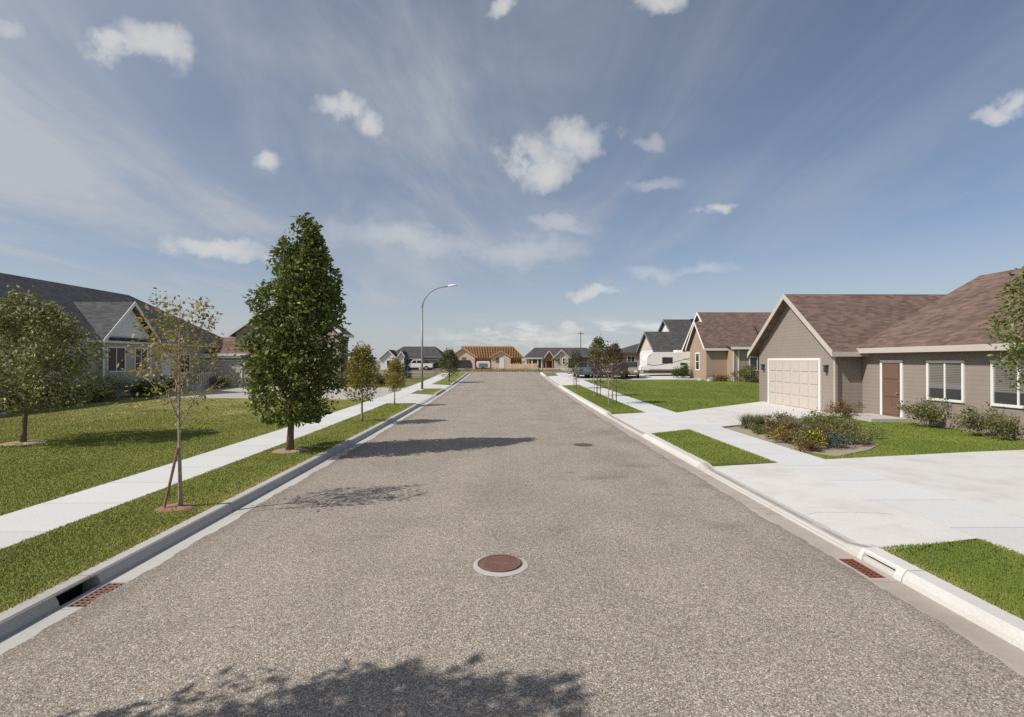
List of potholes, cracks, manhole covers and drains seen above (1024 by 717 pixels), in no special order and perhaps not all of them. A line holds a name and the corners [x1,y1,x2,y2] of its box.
drain grate [834,547,919,580]
manhole cover [473,554,528,577]
drain grate [33,570,129,610]
